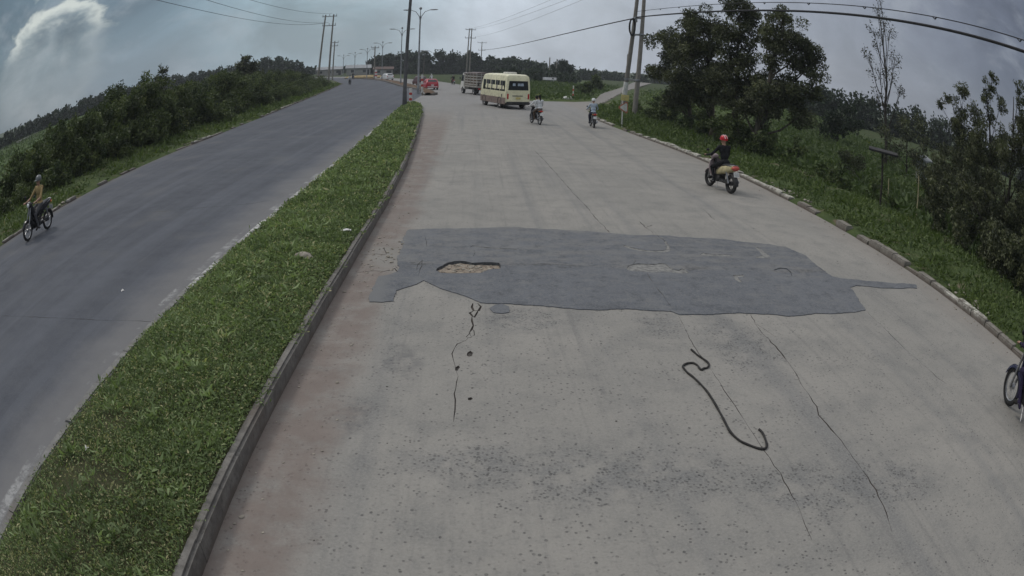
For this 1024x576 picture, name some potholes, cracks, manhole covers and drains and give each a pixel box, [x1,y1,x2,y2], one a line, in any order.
pothole [627,263,689,273]
crack [451,303,482,422]
crack [751,316,892,531]
pothole [436,261,501,273]
